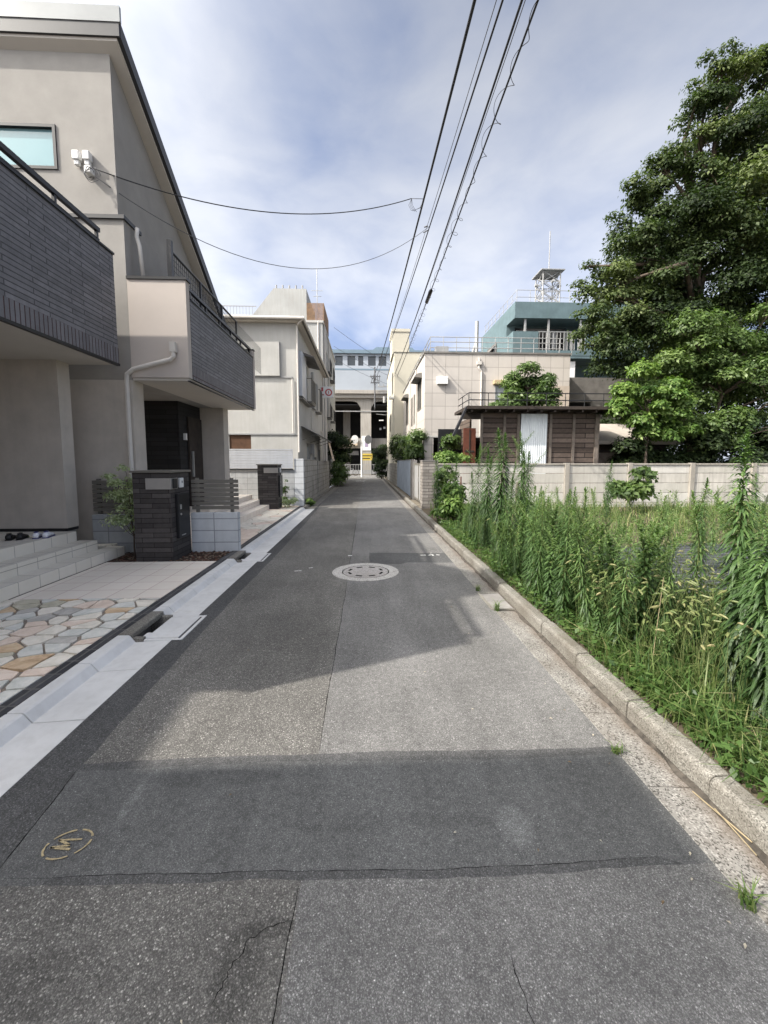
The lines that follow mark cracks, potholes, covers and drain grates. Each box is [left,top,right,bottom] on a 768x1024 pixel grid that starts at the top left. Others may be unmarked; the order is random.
crack [3,856,654,1024]
manhole cover [332,563,399,581]
